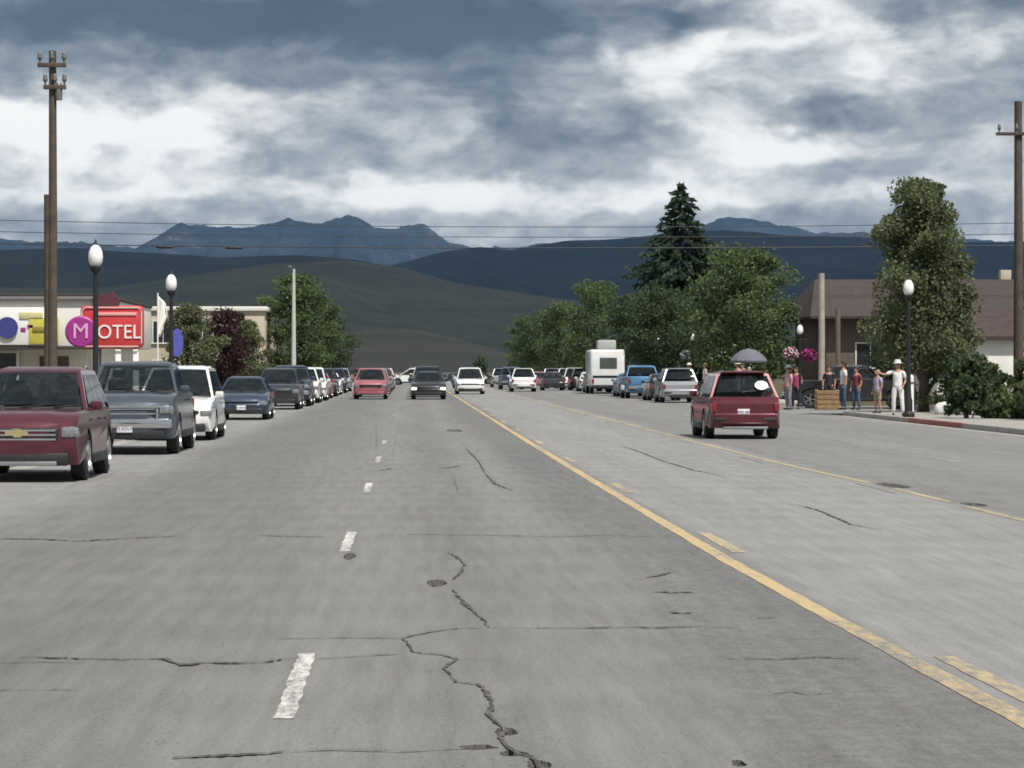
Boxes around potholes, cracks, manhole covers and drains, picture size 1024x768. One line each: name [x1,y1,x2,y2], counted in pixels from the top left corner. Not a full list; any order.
crack [172,552,547,768]
crack [648,572,693,593]
crack [419,449,516,490]
pothole [427,579,447,587]
crack [20,656,298,665]
